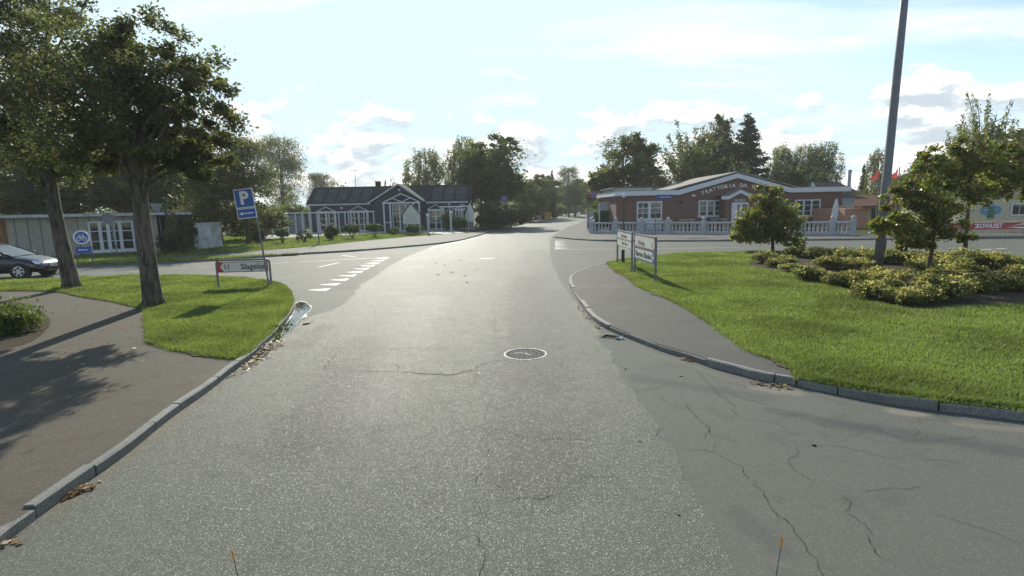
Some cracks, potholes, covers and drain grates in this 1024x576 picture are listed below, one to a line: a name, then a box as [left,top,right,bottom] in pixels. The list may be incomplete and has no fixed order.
crack [638,379,824,575]
crack [697,371,999,478]
crack [323,344,505,375]
manhole cover [504,348,547,360]
crack [843,482,936,558]
